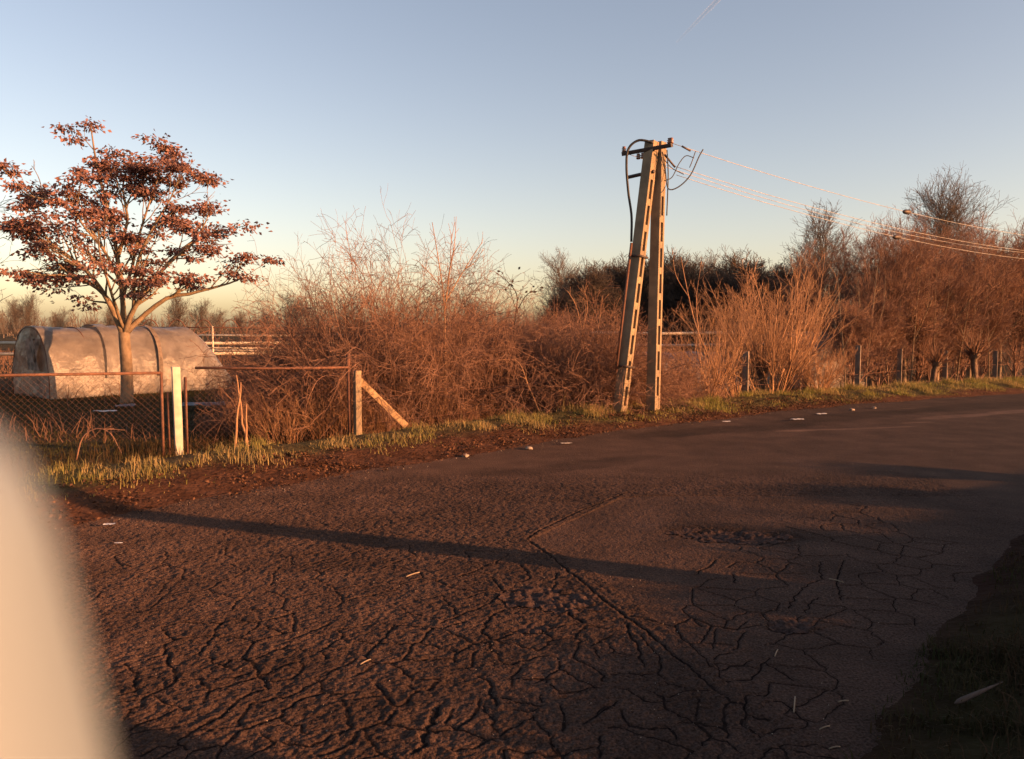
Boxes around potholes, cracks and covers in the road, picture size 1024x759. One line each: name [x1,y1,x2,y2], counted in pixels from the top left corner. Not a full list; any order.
pothole [665,526,795,545]
crack [67,504,972,759]
